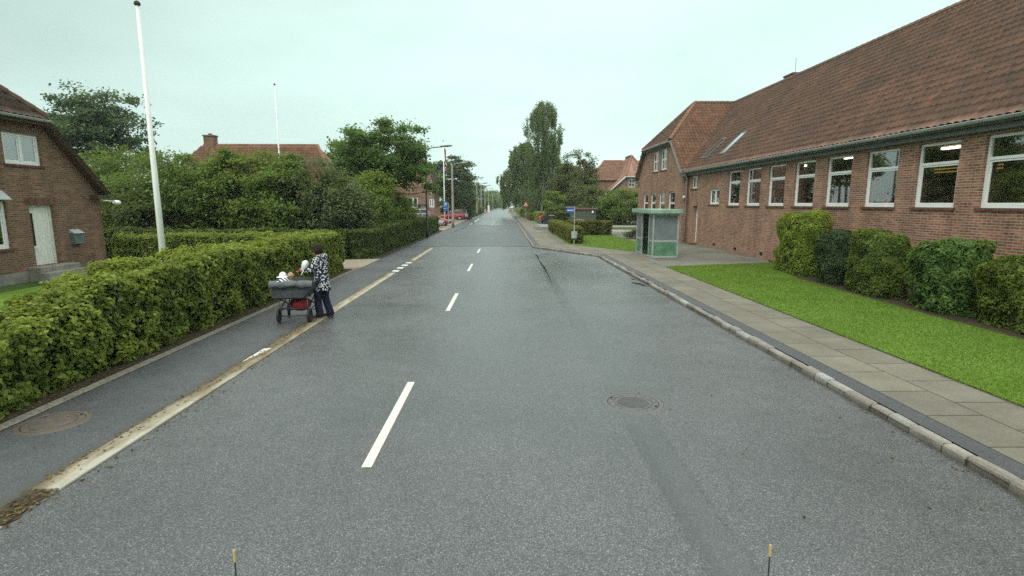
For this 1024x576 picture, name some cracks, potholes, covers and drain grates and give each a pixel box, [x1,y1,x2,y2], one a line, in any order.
manhole cover [603,392,664,414]
manhole cover [12,410,92,435]
